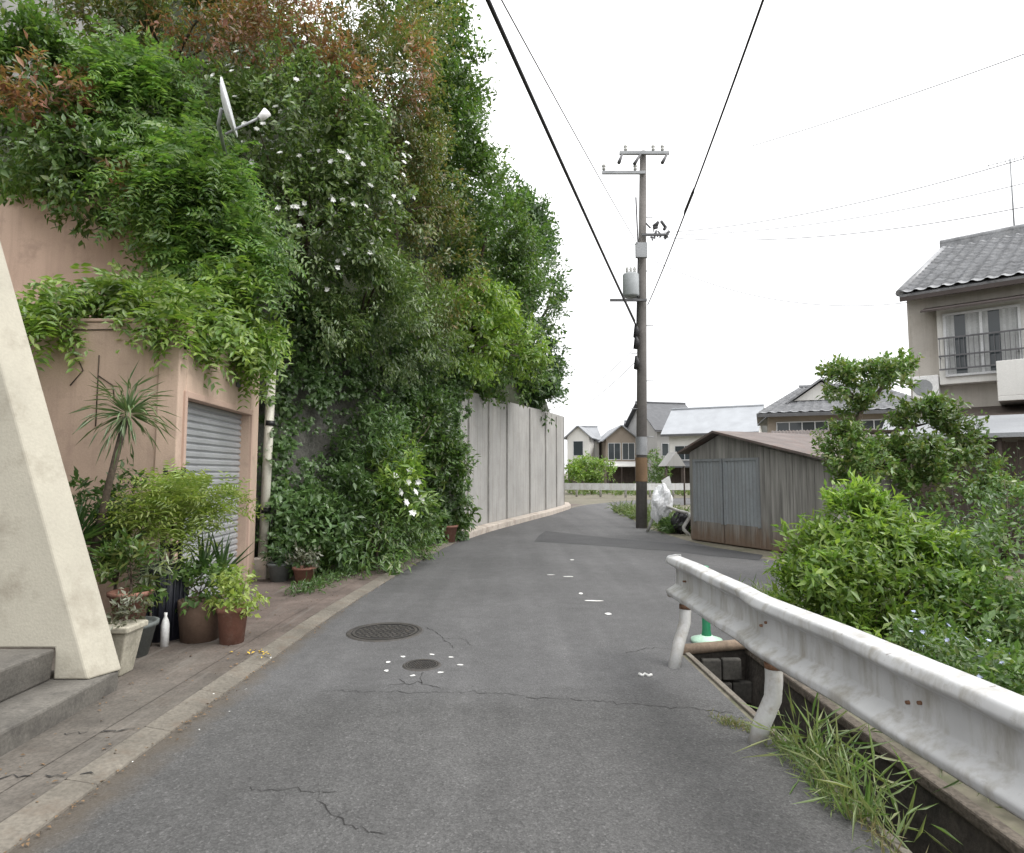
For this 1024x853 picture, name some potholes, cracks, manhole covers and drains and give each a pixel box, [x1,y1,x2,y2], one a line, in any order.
manhole cover [402,659,442,671]
crack [250,786,383,834]
manhole cover [346,622,423,642]
